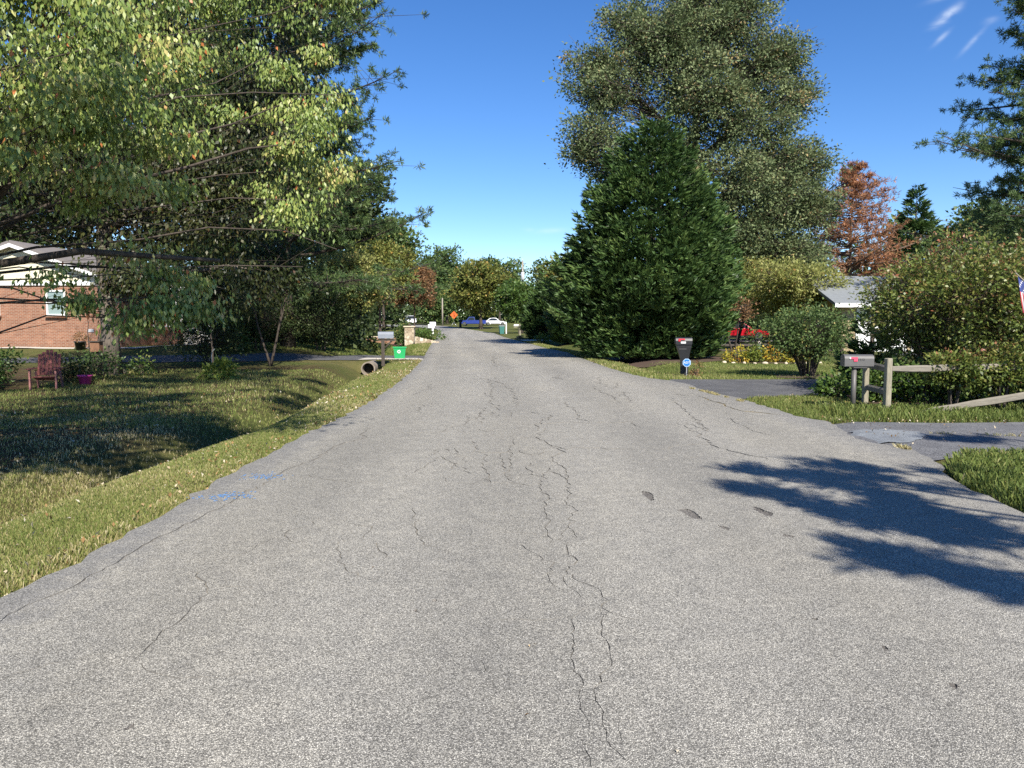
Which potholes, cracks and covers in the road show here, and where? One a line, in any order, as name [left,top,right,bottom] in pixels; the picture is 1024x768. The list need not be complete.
crack [409,356,647,768]
pothole [678,509,702,519]
crack [660,394,780,459]
crack [335,523,392,581]
